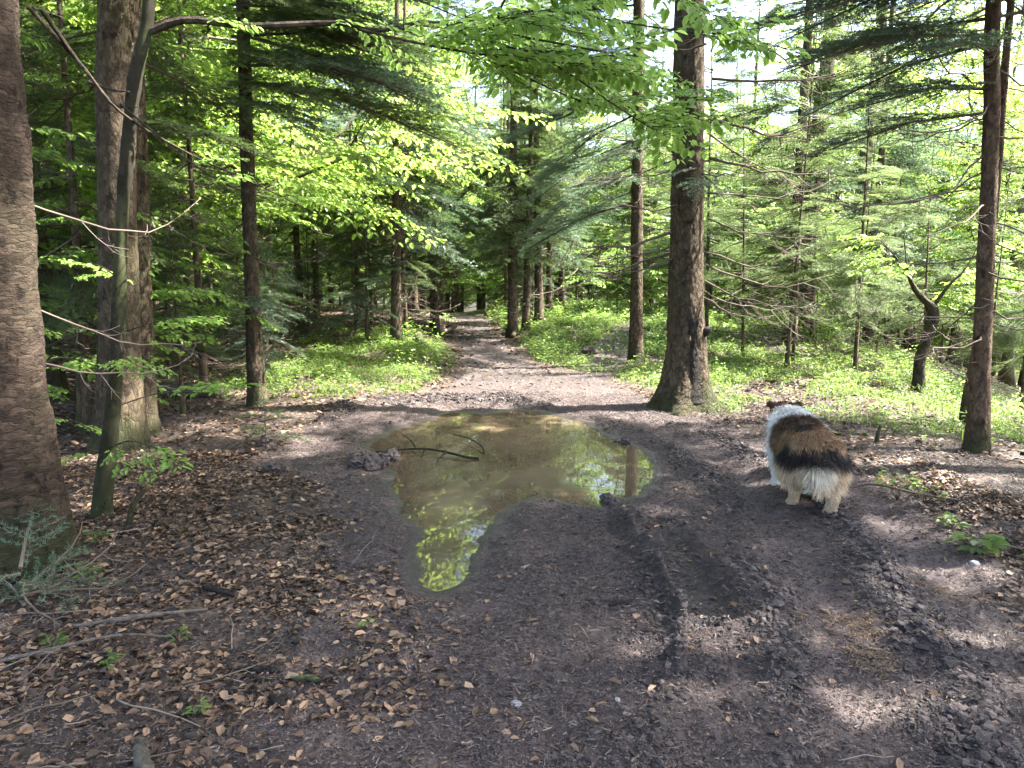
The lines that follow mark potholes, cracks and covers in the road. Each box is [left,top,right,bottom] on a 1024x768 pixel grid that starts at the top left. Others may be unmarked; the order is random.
pothole [359,408,670,605]
